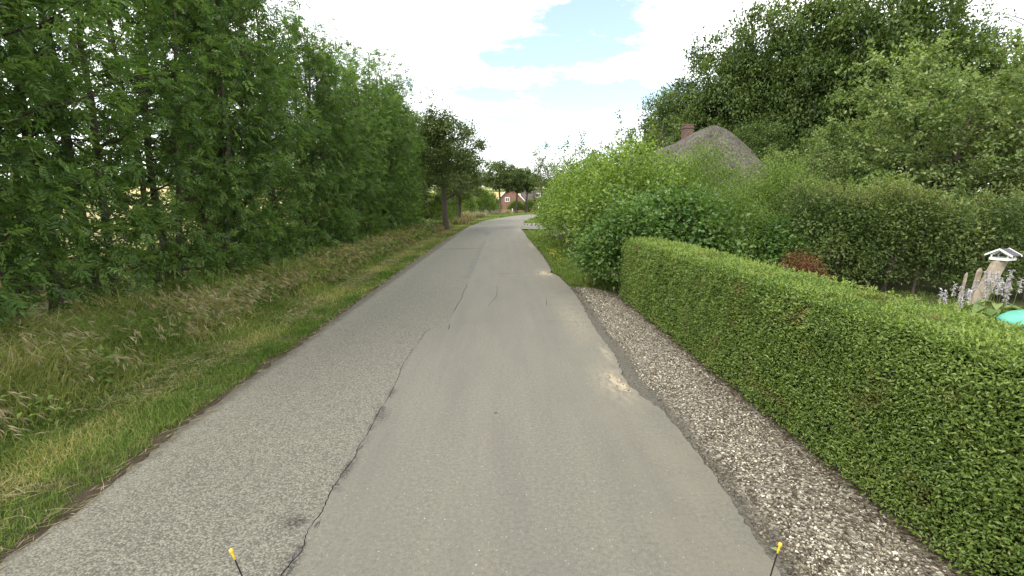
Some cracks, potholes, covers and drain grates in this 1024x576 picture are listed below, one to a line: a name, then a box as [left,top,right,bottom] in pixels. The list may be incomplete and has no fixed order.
crack [281,330,428,576]
